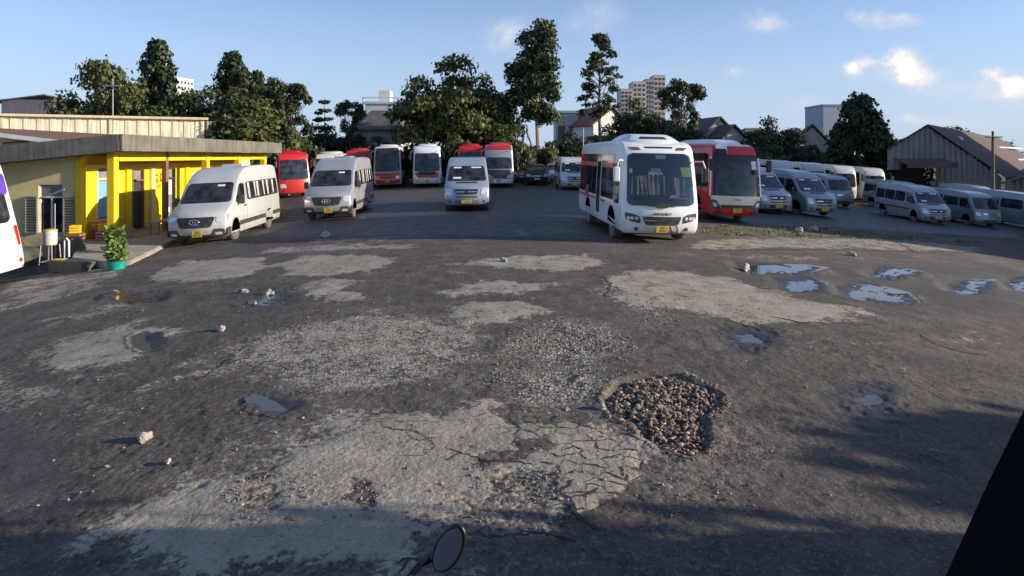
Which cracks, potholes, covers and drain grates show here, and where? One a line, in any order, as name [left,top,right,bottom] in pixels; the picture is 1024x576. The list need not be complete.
pothole [597,370,729,458]
crack [364,401,645,544]
pothole [124,330,173,353]
pothole [244,388,313,419]
